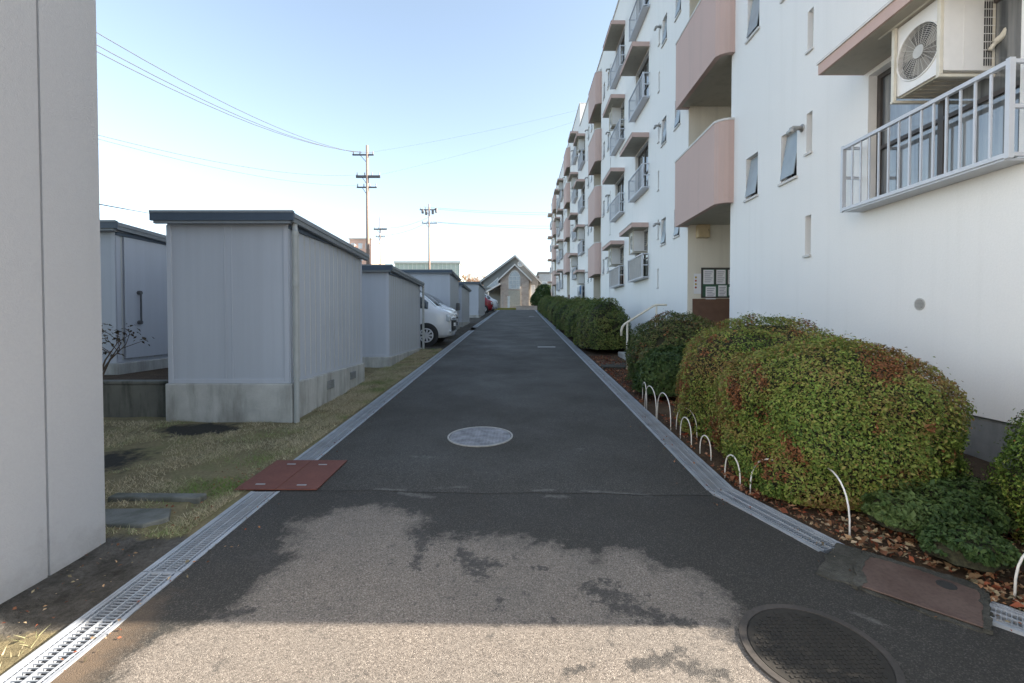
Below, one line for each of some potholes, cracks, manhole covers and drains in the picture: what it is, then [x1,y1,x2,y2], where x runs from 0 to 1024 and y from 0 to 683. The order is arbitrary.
drain grate [990,601,1024,636]
manhole cover [447,426,513,447]
manhole cover [739,604,906,683]
drain grate [620,399,657,419]
drain grate [597,375,619,386]
drain grate [607,385,635,400]
drain grate [588,366,608,375]
